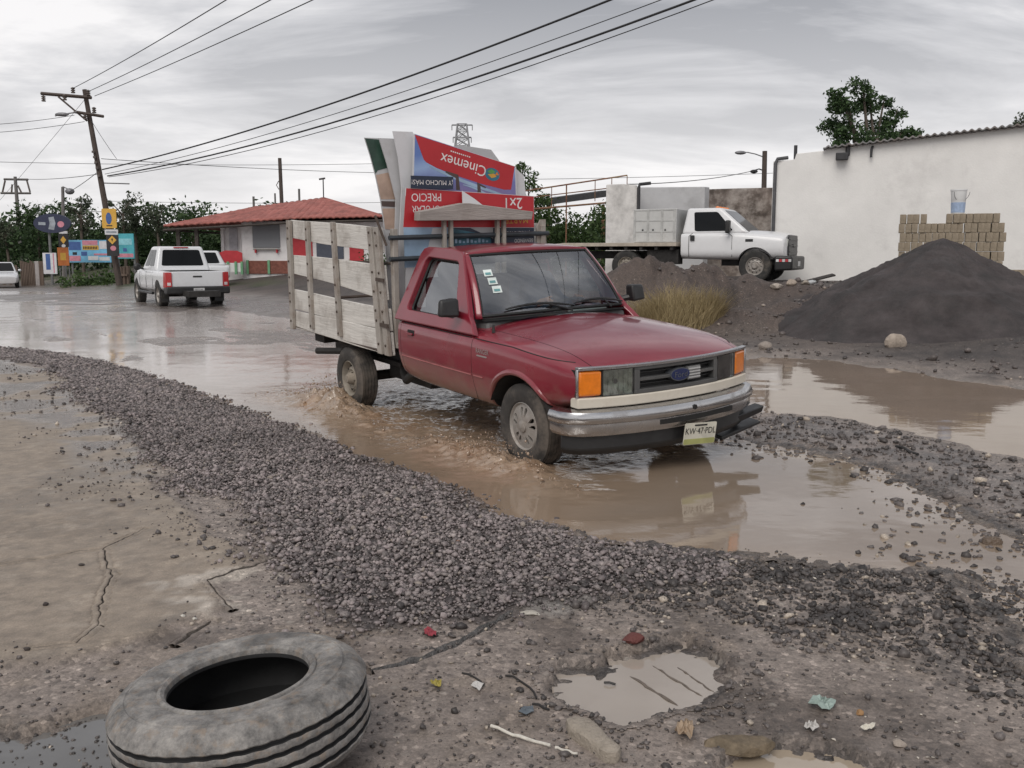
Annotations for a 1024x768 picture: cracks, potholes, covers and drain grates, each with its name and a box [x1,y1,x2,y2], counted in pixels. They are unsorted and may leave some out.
crack [169,620,218,648]
pothole [538,437,1024,672]
pothole [0,696,116,768]
crack [0,528,147,651]
pothole [533,628,753,731]
